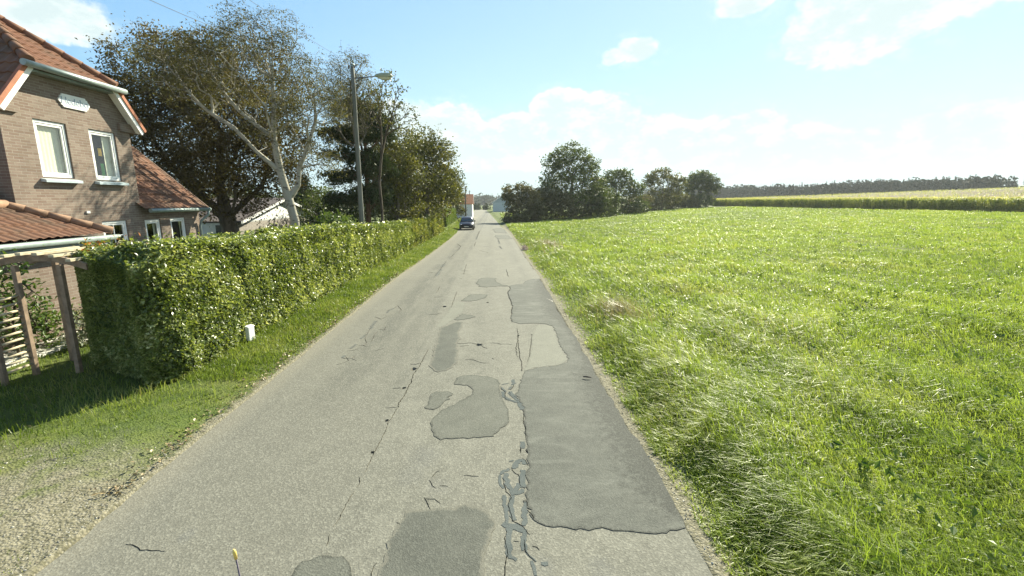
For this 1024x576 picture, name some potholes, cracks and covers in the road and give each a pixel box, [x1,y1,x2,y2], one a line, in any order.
crack [326,350,428,546]
crack [458,269,548,576]
